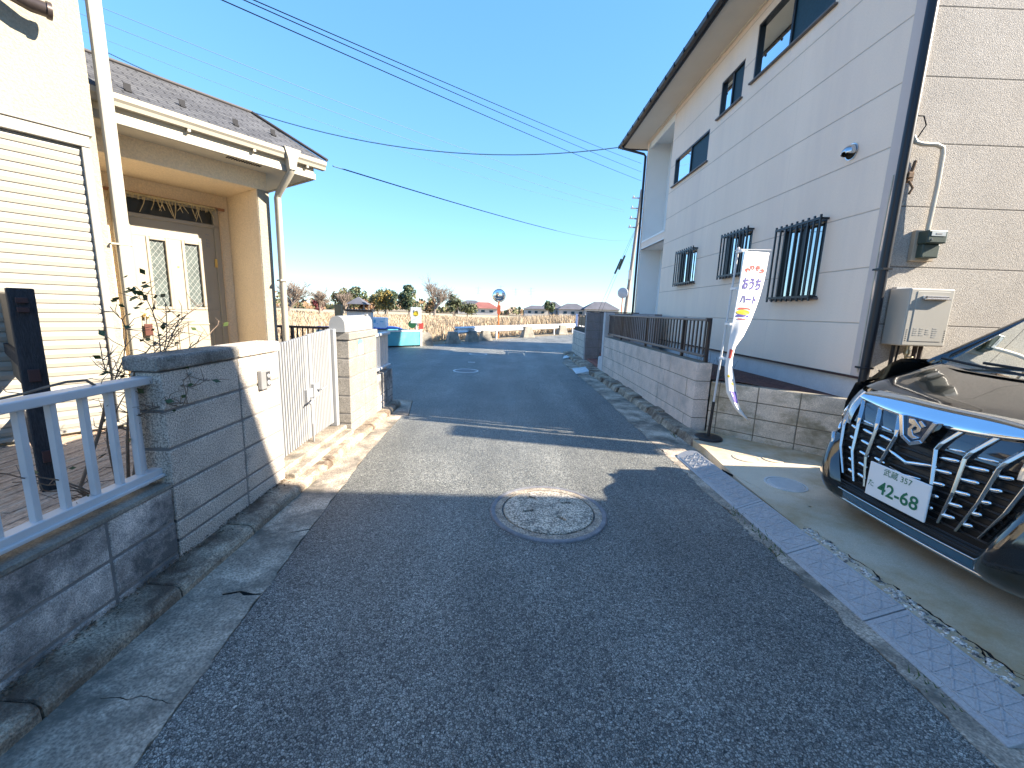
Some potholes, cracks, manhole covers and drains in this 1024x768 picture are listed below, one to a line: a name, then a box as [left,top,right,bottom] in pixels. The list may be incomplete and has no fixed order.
crack [817,532,1024,680]
manhole cover [490,486,607,544]
